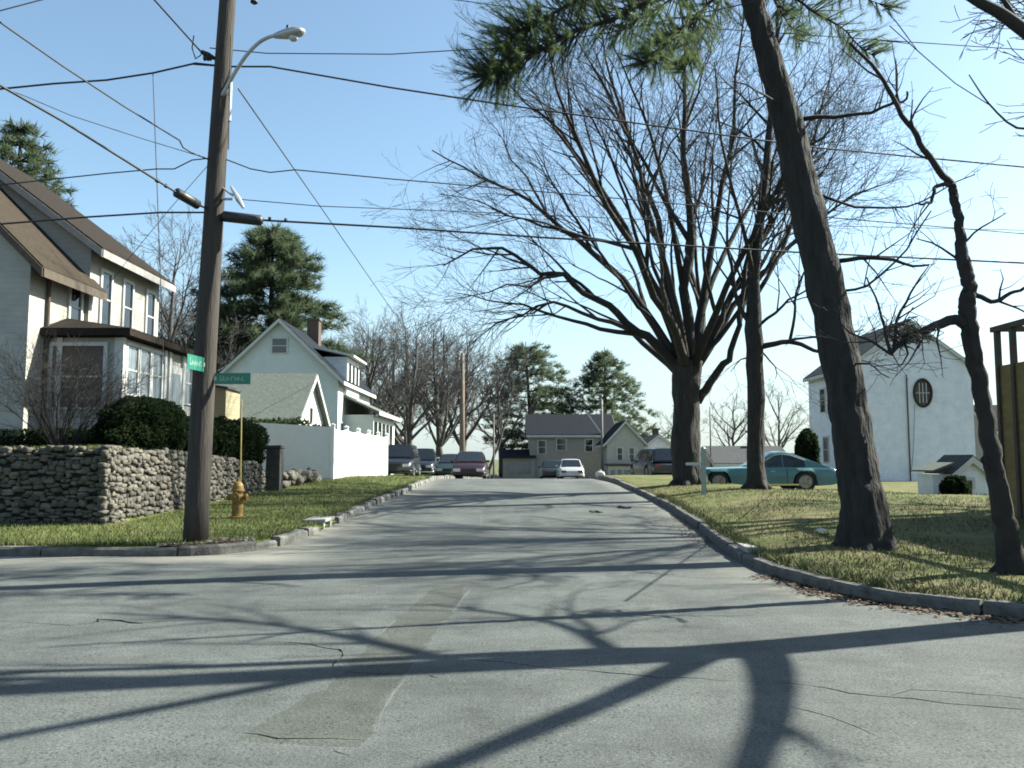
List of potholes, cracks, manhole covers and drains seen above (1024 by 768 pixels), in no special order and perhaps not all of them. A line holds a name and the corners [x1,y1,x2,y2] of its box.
crack [247,733,352,755]
crack [471,659,1024,710]
crack [266,641,394,674]
crack [28,617,234,626]
